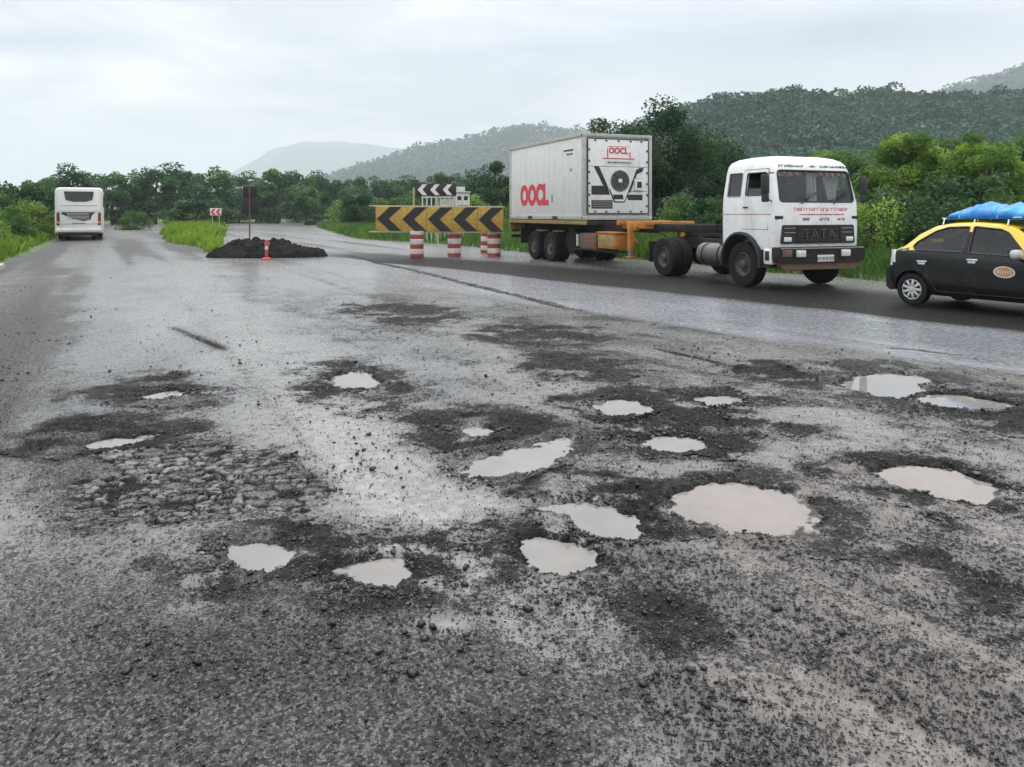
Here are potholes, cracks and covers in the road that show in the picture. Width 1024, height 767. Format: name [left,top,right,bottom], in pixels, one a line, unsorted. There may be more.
pothole [385,403,572,454]
pothole [593,406,826,460]
pothole [173,519,322,592]
pothole [303,522,460,603]
pothole [1,410,230,461]
pothole [544,380,682,423]
pothole [436,425,606,488]
pothole [864,384,1024,438]
